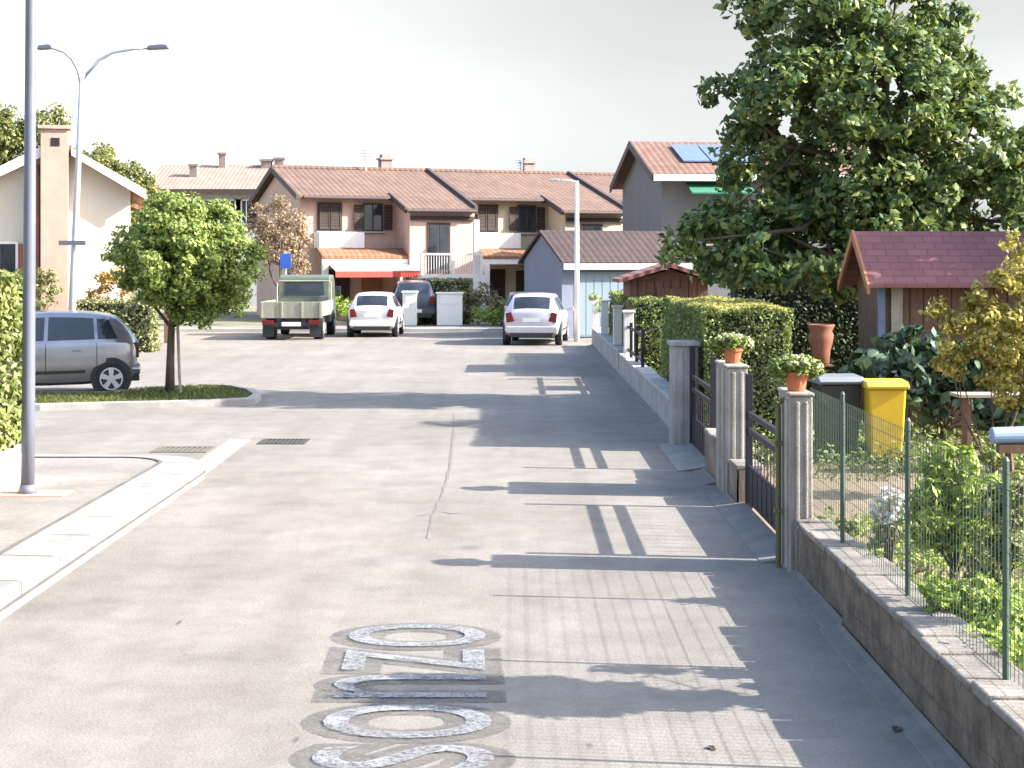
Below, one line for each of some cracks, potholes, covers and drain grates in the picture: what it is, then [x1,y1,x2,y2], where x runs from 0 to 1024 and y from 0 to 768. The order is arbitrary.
crack [425,412,456,538]
